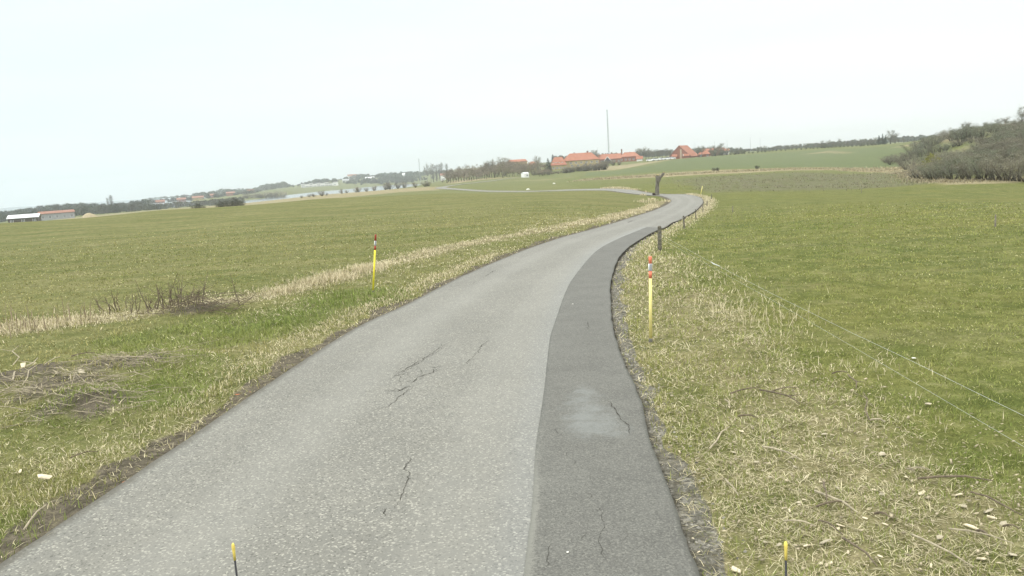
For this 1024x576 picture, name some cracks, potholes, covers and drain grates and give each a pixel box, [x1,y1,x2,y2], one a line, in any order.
crack [377,346,448,409]
